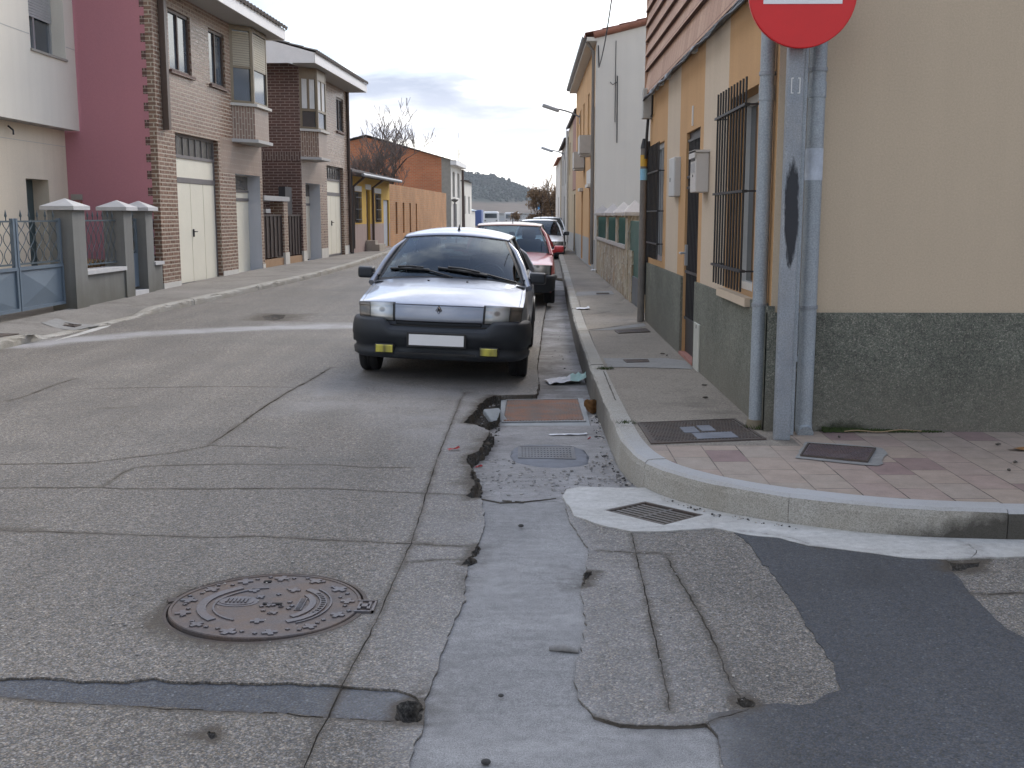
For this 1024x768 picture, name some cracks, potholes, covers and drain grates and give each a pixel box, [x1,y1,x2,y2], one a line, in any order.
crack [595,542,707,730]
pothole [466,433,494,468]
crack [669,561,729,681]
crack [7,402,460,768]
drain grate [606,502,702,525]
pothole [395,701,423,723]
manhole cover [637,418,766,446]
pothole [468,468,483,498]
manhole cover [162,573,378,644]
manhole cover [800,443,876,463]
manhole cover [500,398,590,426]
